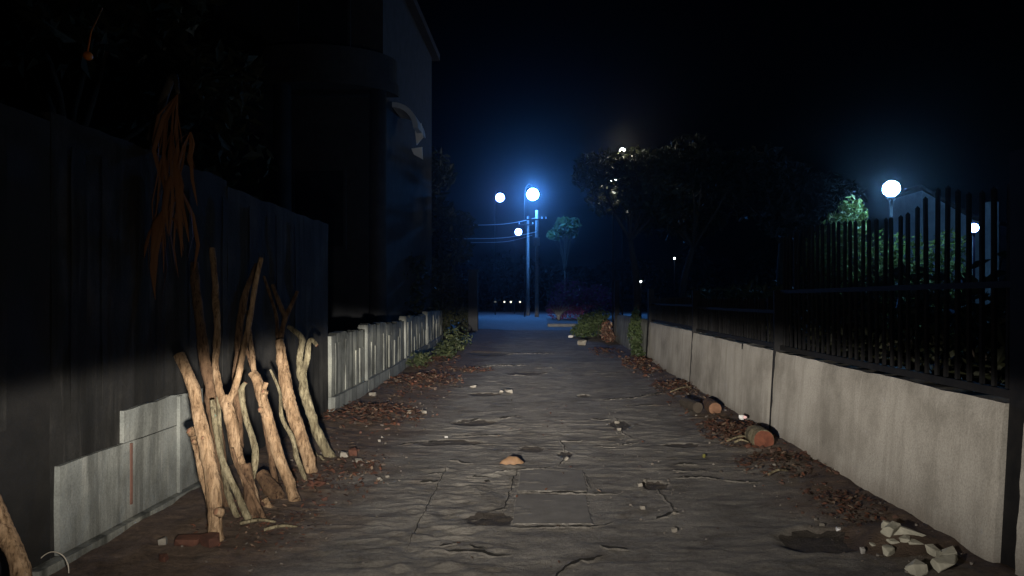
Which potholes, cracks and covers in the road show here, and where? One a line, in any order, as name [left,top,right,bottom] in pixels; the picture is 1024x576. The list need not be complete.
crack [639,446,760,520]
pothole [778,530,854,553]
pothole [609,421,631,430]
pothole [465,512,513,526]
crack [397,390,670,576]
